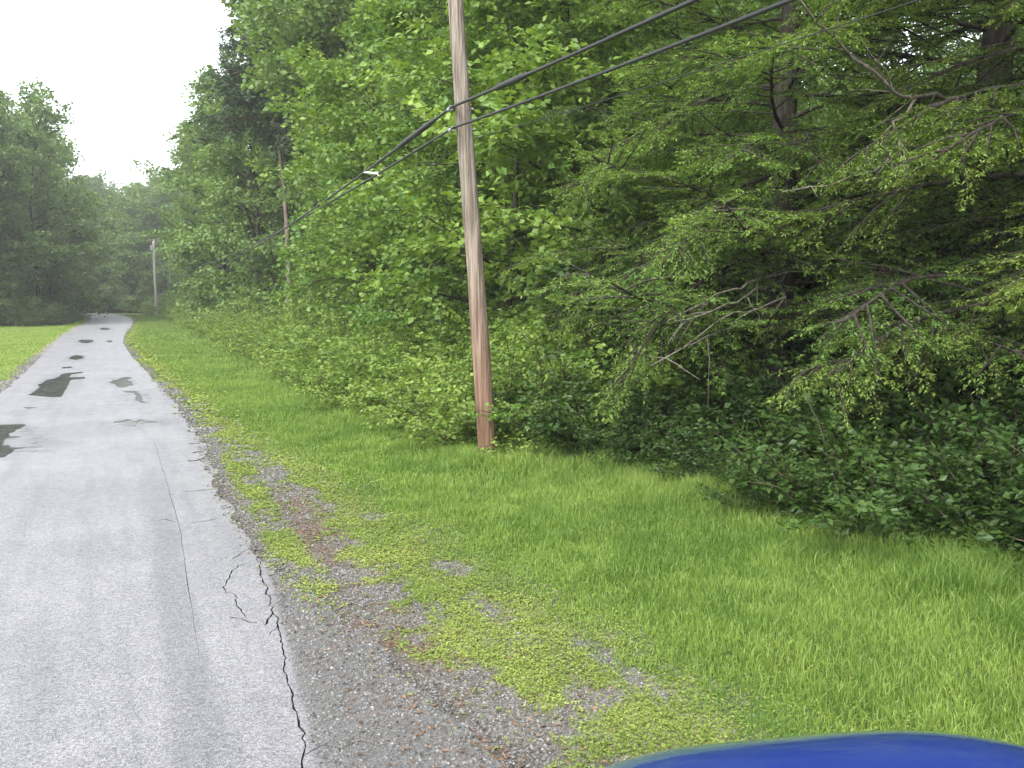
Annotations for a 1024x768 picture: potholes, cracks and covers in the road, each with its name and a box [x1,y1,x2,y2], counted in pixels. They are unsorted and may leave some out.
crack [223,543,378,768]
